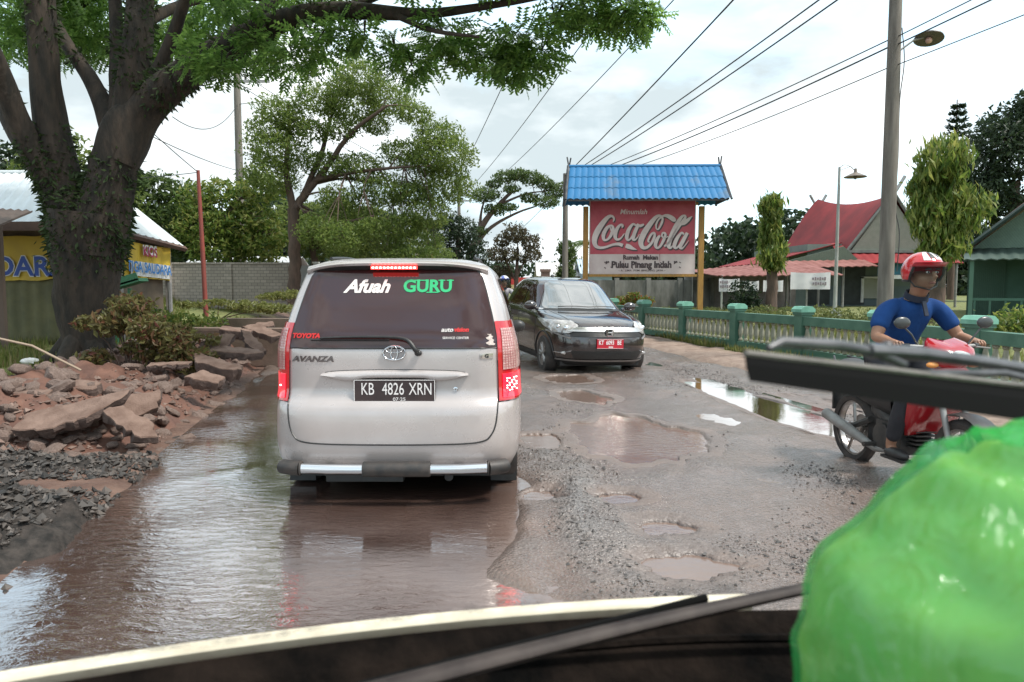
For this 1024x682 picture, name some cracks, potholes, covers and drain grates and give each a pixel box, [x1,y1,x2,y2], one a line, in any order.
pothole [613,540,770,588]
pothole [533,373,605,384]
pothole [519,430,577,450]
pothole [548,388,626,407]
pothole [552,410,729,468]
pothole [678,379,865,445]
pothole [515,477,578,507]
pothole [573,480,663,507]
pothole [613,509,725,540]
